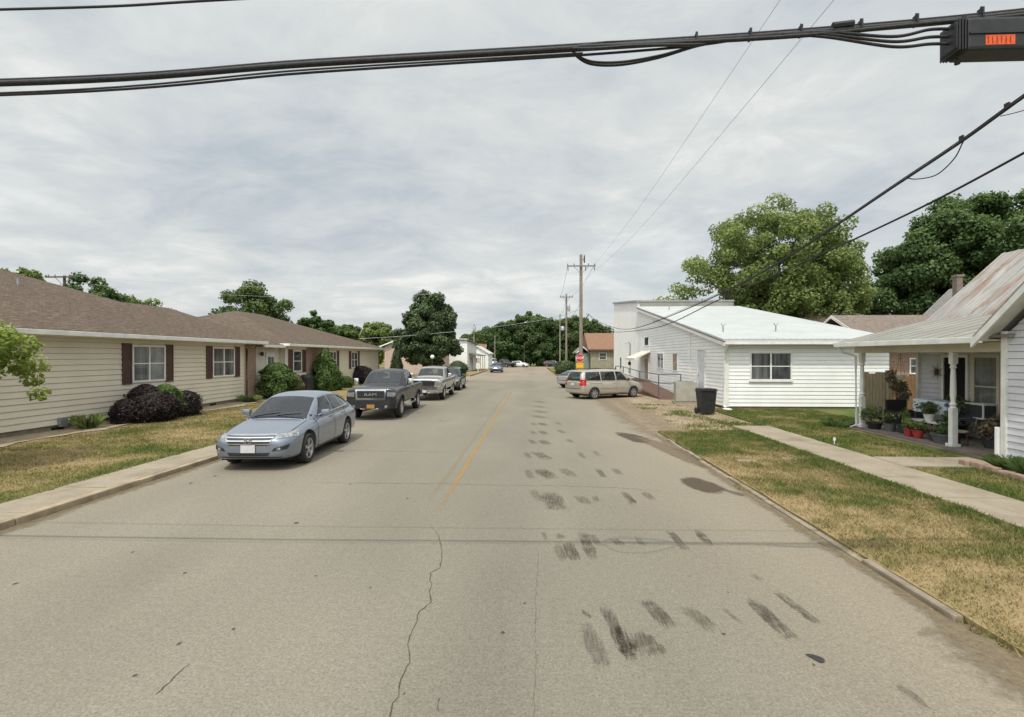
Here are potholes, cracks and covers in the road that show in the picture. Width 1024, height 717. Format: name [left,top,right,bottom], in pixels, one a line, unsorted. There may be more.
crack [389,526,442,717]
